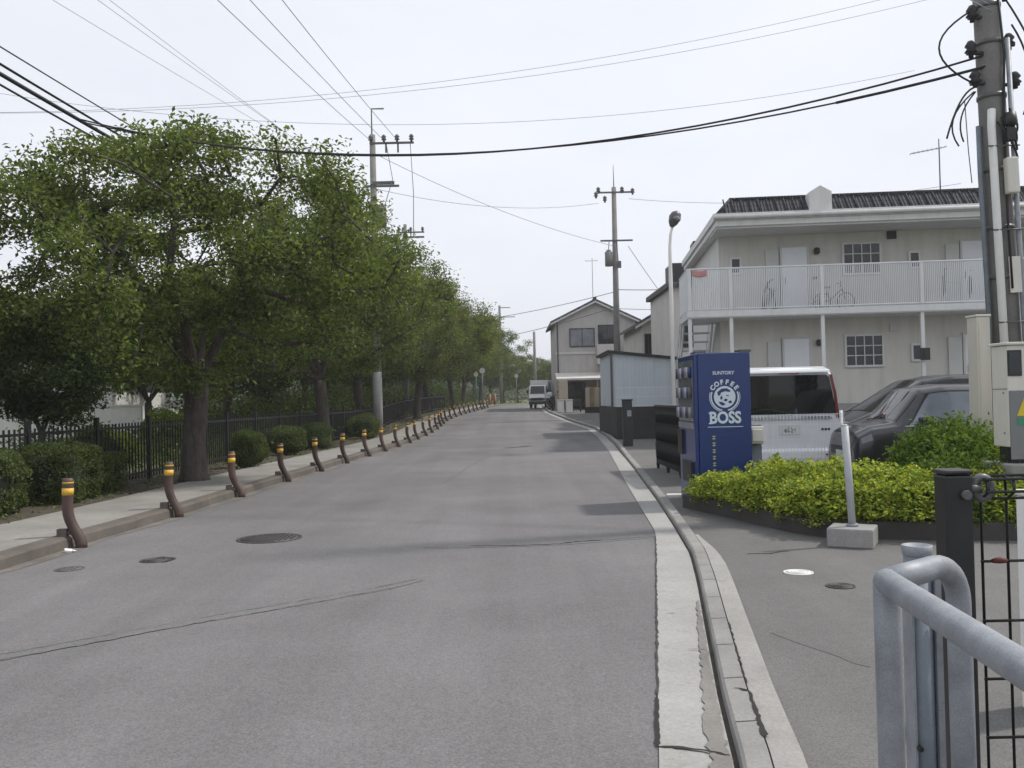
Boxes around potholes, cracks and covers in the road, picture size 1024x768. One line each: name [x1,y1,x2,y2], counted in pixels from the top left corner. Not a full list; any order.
crack [696,600,733,768]
manhole cover [236,533,303,544]
